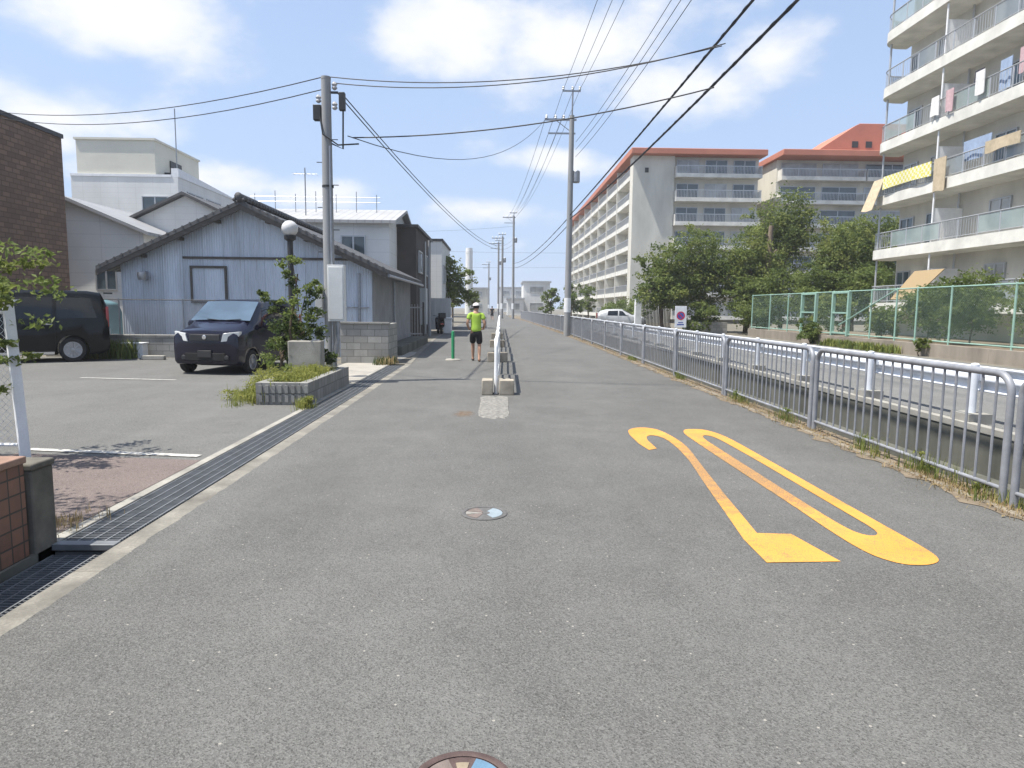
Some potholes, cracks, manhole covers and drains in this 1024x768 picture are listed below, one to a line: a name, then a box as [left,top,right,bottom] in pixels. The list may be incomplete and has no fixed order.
manhole cover [461,506,507,521]
drain grate [234,433,294,450]
drain grate [0,555,100,617]
drain grate [310,400,346,410]
drain grate [193,449,268,472]
drain grate [139,471,233,501]
drain grate [65,500,186,542]
manhole cover [419,751,508,768]
drain grate [264,420,315,434]
drain grate [288,409,332,420]
drain grate [325,393,358,401]
